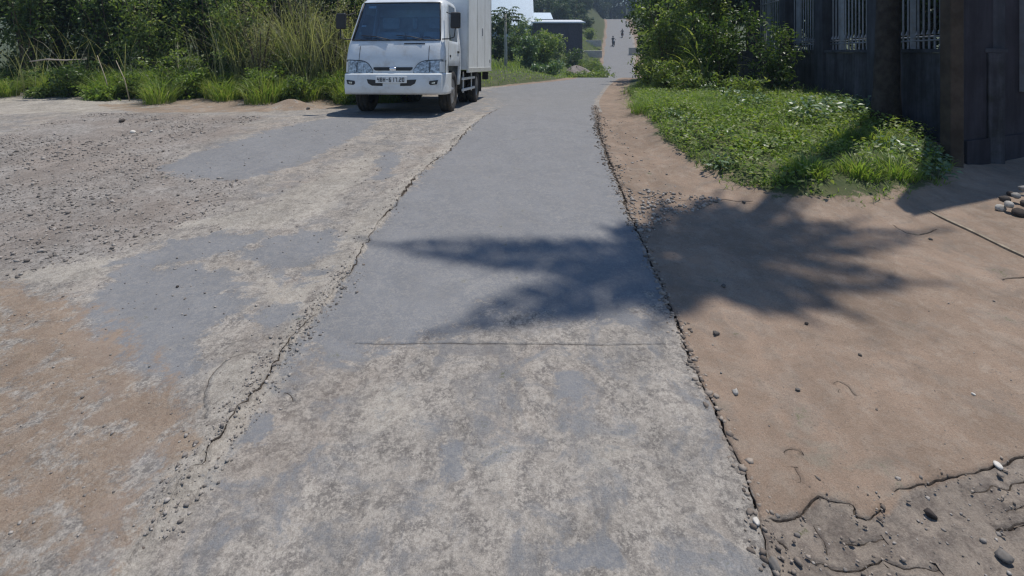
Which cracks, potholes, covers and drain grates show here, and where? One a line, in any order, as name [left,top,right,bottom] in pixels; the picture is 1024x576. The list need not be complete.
crack [281,390,300,405]
crack [195,348,260,422]
